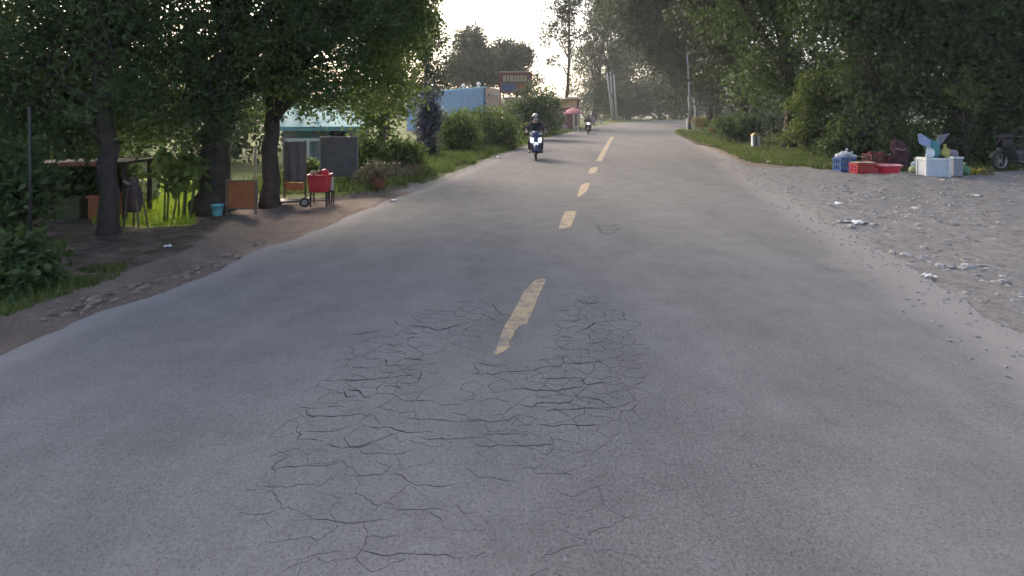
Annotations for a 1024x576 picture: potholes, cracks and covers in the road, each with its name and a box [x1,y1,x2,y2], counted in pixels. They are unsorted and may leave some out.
crack [241,301,553,576]
crack [430,295,650,576]
